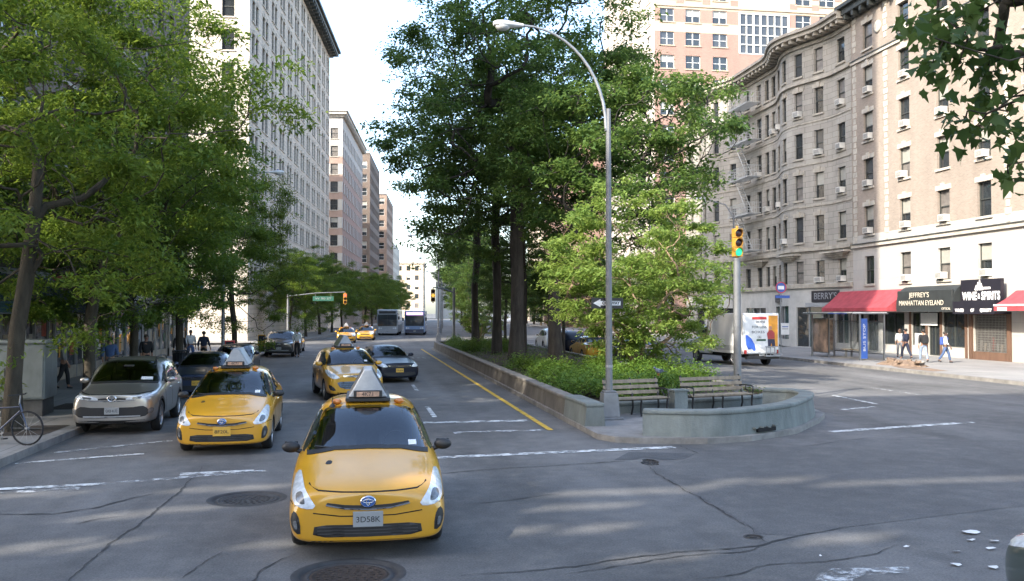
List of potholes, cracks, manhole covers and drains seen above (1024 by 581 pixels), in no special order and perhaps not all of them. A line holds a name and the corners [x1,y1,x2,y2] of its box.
manhole cover [206,491,287,507]
crack [31,468,202,581]
manhole cover [290,558,406,581]
